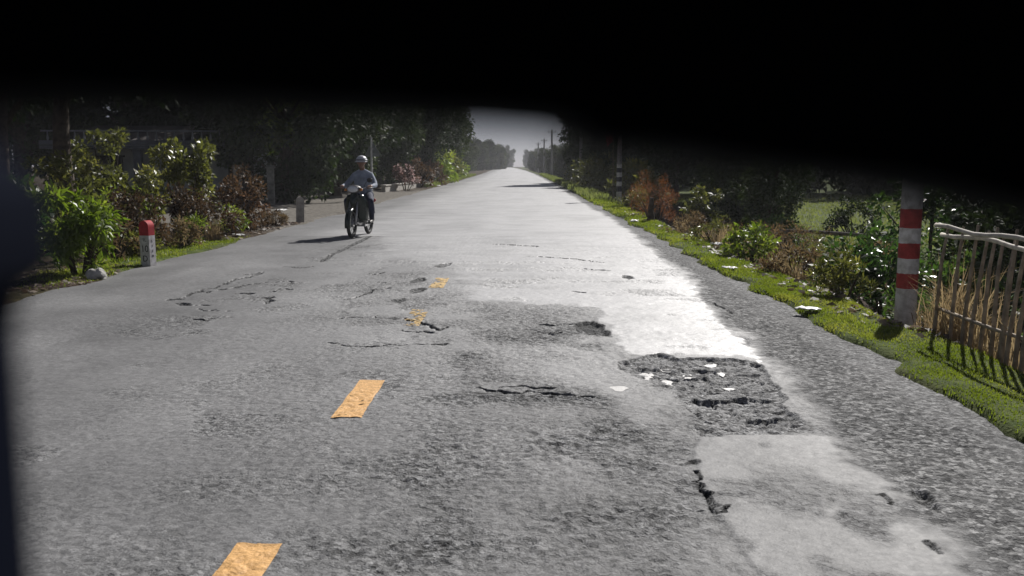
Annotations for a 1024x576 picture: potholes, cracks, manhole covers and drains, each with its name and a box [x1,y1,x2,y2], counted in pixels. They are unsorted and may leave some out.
pothole [616,353,809,437]
crack [476,384,596,398]
crack [168,236,450,348]
pothole [910,486,946,511]
crack [691,470,732,515]
pothole [573,320,614,337]
